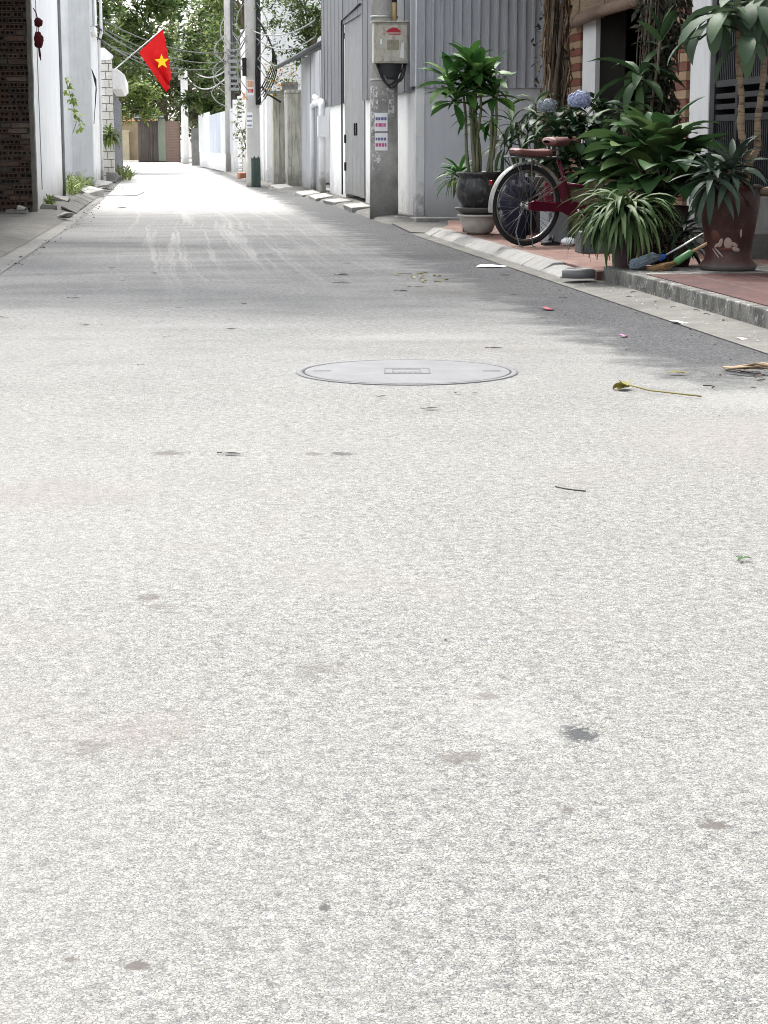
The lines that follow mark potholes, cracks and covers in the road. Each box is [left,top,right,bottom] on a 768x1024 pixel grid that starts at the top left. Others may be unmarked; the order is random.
manhole cover [296,359,518,385]
